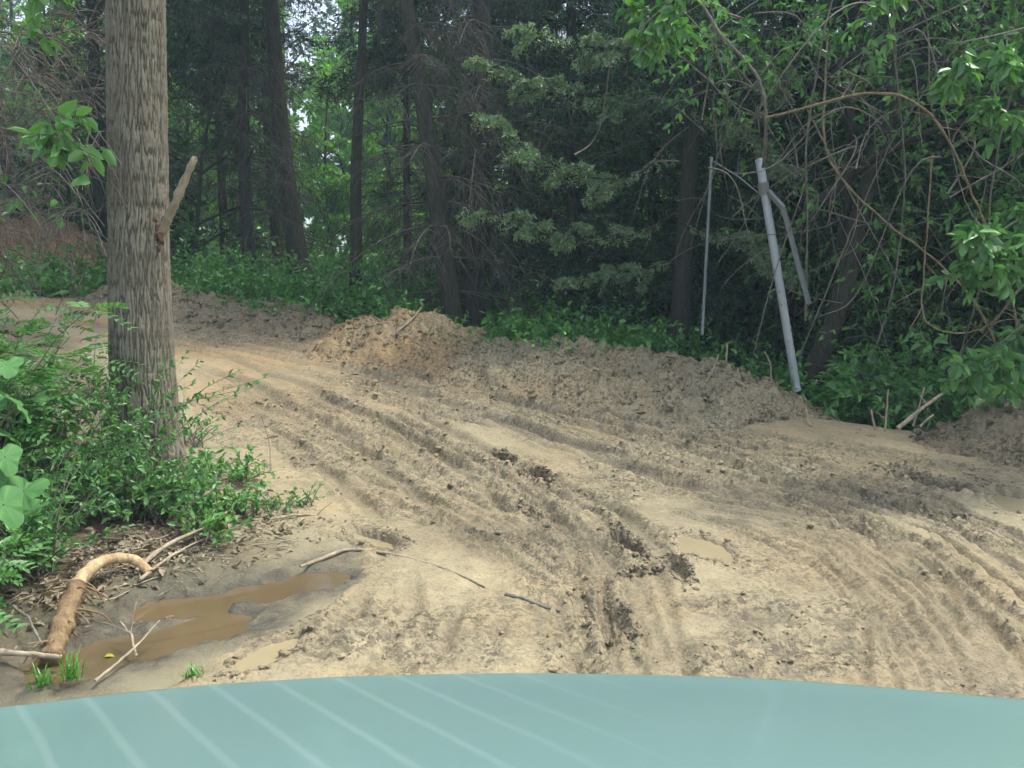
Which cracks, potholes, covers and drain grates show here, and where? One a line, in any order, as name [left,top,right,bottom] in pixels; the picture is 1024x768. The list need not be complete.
pothole [597,520,658,563]
pothole [665,526,753,569]
pothole [212,624,315,682]
pothole [658,550,700,591]
